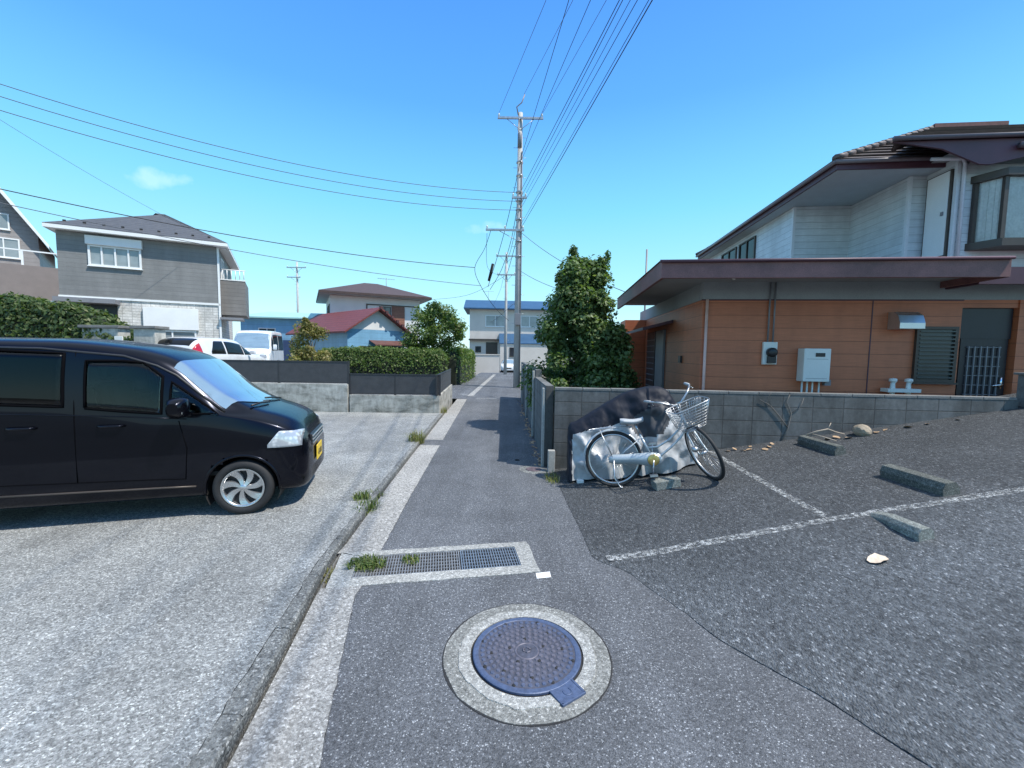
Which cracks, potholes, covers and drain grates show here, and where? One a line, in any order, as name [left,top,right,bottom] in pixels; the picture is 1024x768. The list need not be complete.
drain grate [326,541,541,616]
manhole cover [442,604,613,726]
